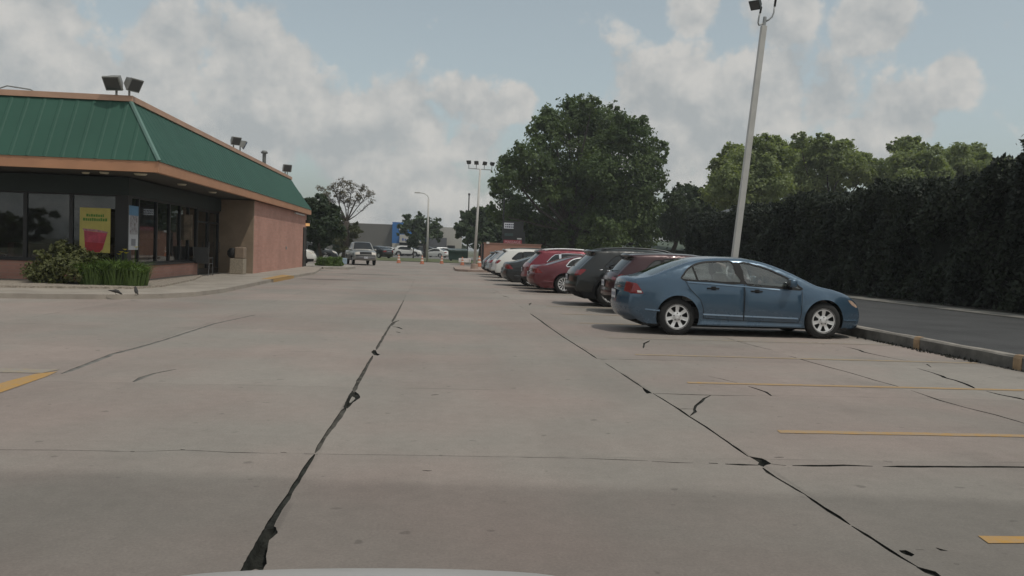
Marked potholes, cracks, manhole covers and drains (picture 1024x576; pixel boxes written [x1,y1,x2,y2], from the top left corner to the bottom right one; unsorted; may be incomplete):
crack [75,303,1024,576]
